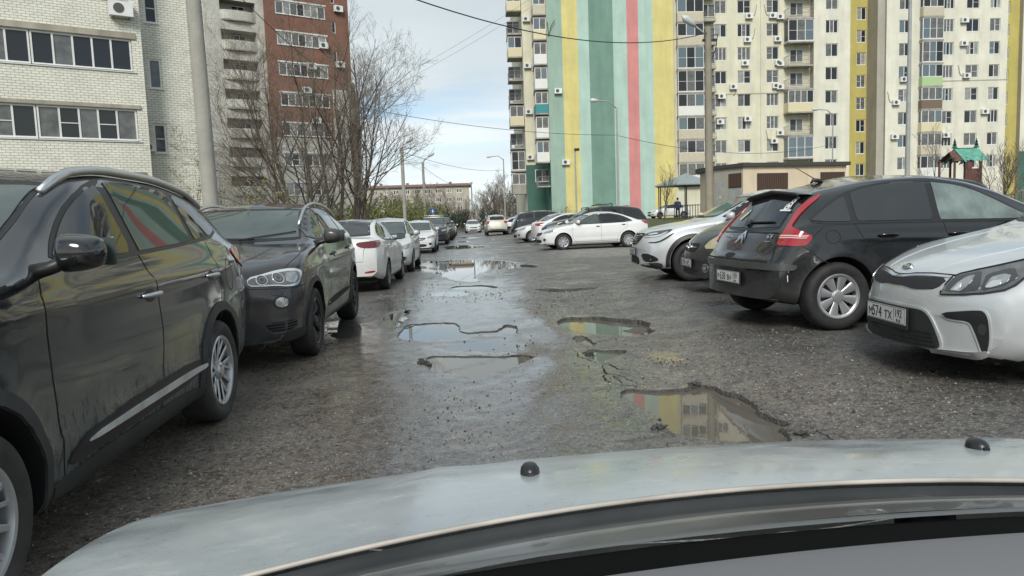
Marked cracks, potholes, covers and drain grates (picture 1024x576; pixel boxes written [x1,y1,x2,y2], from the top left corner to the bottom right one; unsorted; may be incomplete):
pothole [582,349,627,362]
crack [571,348,637,386]
pothole [557,316,655,336]
pothole [397,322,519,341]
pothole [572,336,597,346]
pothole [424,355,535,378]
pothole [620,385,792,442]
